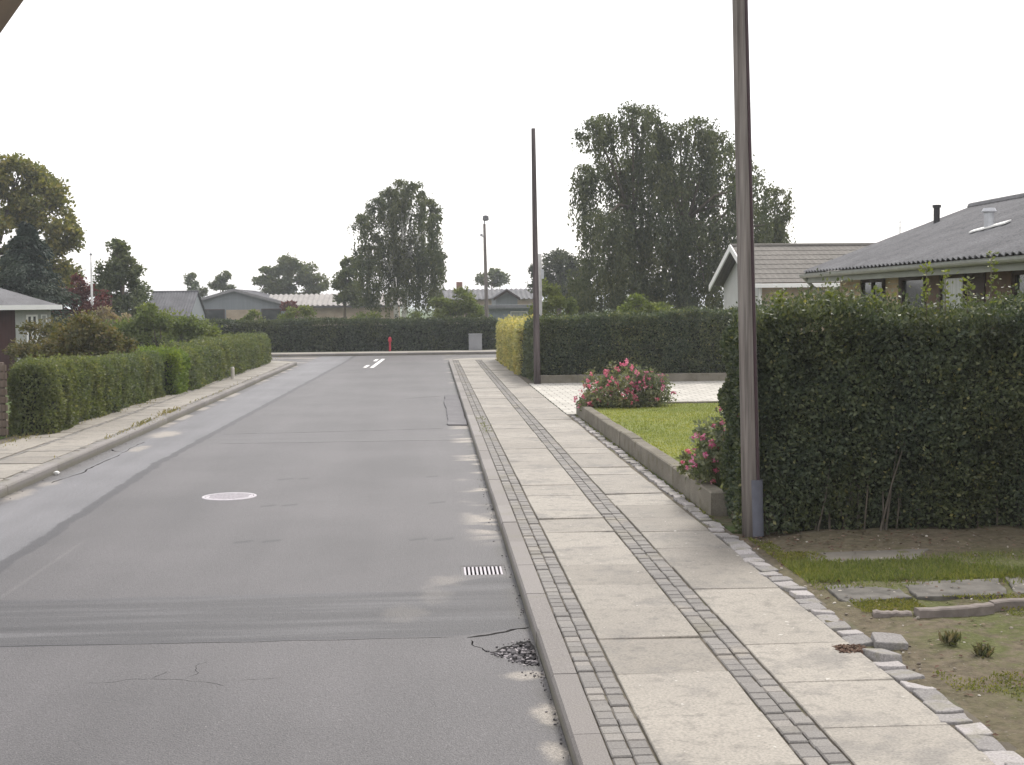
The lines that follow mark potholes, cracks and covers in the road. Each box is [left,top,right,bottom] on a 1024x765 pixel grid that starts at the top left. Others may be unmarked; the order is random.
pothole [485,638,540,666]
manhole cover [202,492,257,501]
drain grate [460,565,507,576]
crack [467,627,529,652]
crack [52,442,144,483]
